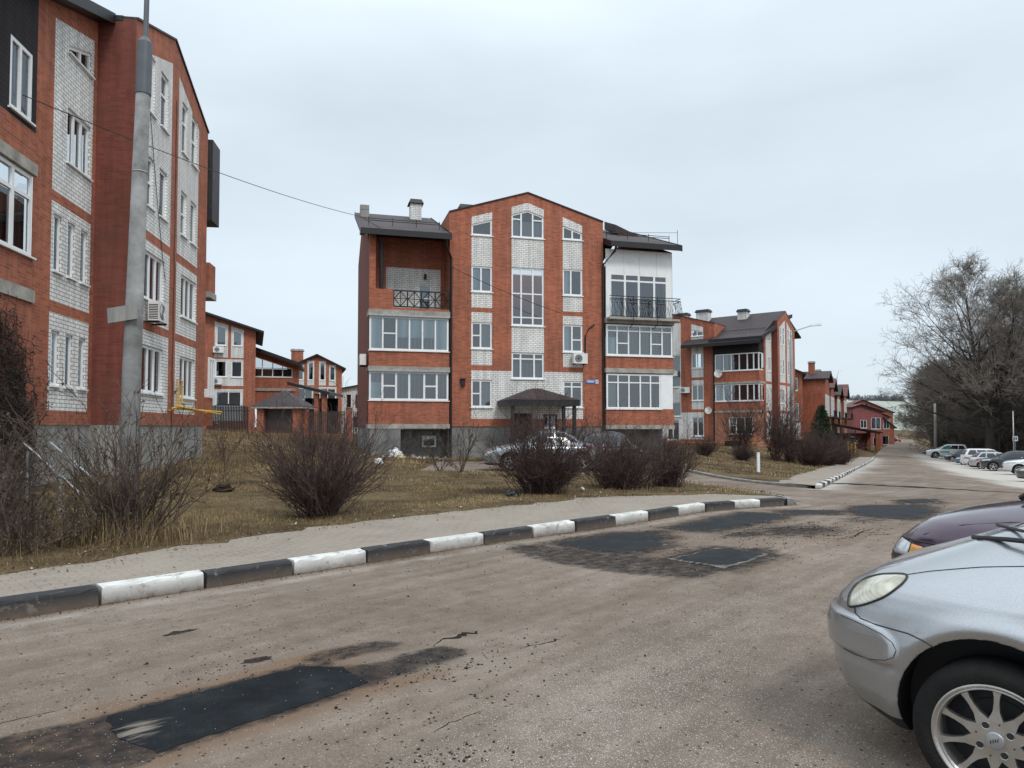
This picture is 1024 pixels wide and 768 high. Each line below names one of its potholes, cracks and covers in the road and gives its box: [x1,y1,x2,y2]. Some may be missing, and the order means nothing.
crack [433,631,478,645]
